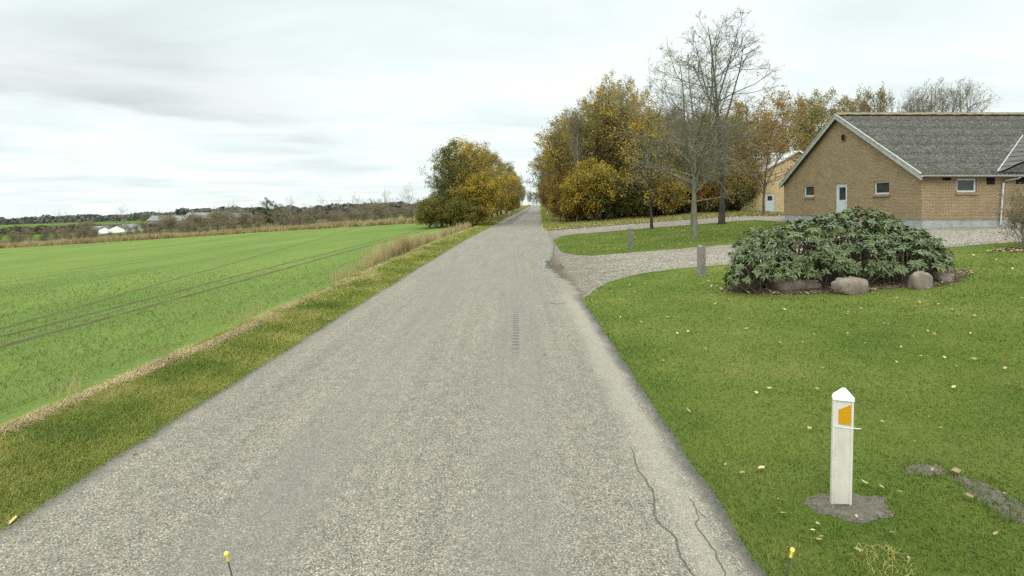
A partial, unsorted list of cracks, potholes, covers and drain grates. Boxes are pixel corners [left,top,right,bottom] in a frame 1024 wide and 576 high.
crack [631,448,726,576]
pothole [541,258,565,271]
